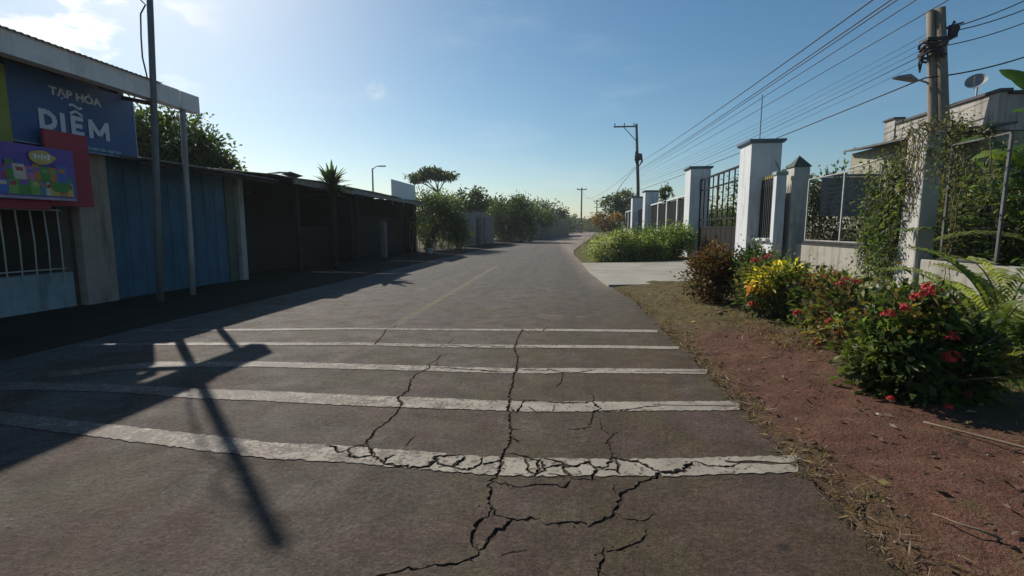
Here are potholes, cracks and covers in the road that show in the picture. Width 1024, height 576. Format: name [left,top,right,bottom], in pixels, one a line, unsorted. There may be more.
crack [329,326,761,576]
